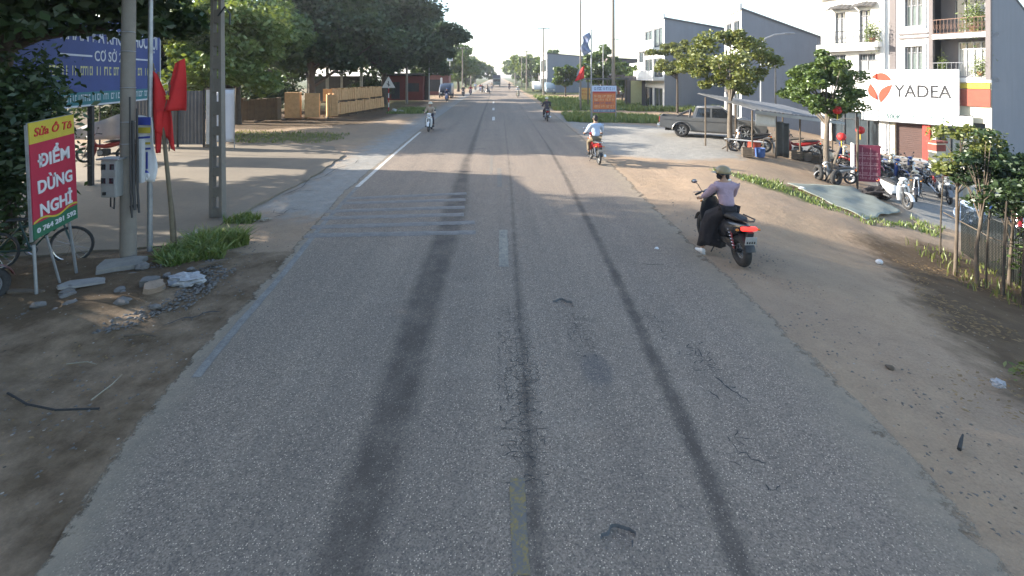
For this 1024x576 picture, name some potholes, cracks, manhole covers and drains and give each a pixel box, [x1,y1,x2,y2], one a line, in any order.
crack [727,431,780,491]
crack [679,342,747,400]
